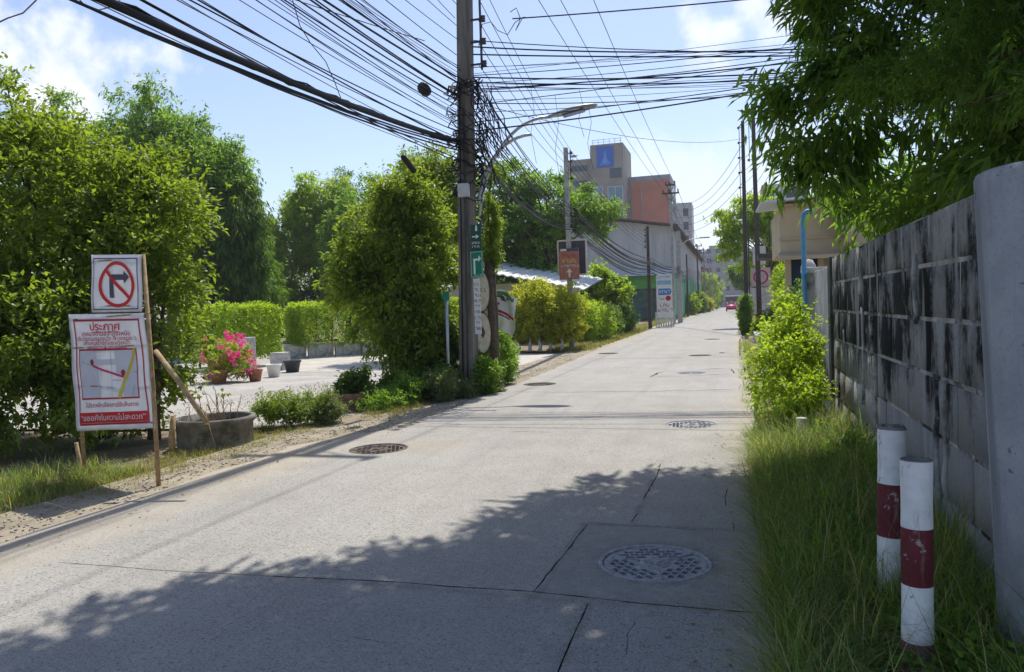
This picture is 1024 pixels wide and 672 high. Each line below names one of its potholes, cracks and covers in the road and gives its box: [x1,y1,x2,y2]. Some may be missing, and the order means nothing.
crack [621,464,705,531]
manhole cover [664,420,718,430]
manhole cover [598,544,713,583]
manhole cover [349,443,408,454]
crack [534,524,588,672]
